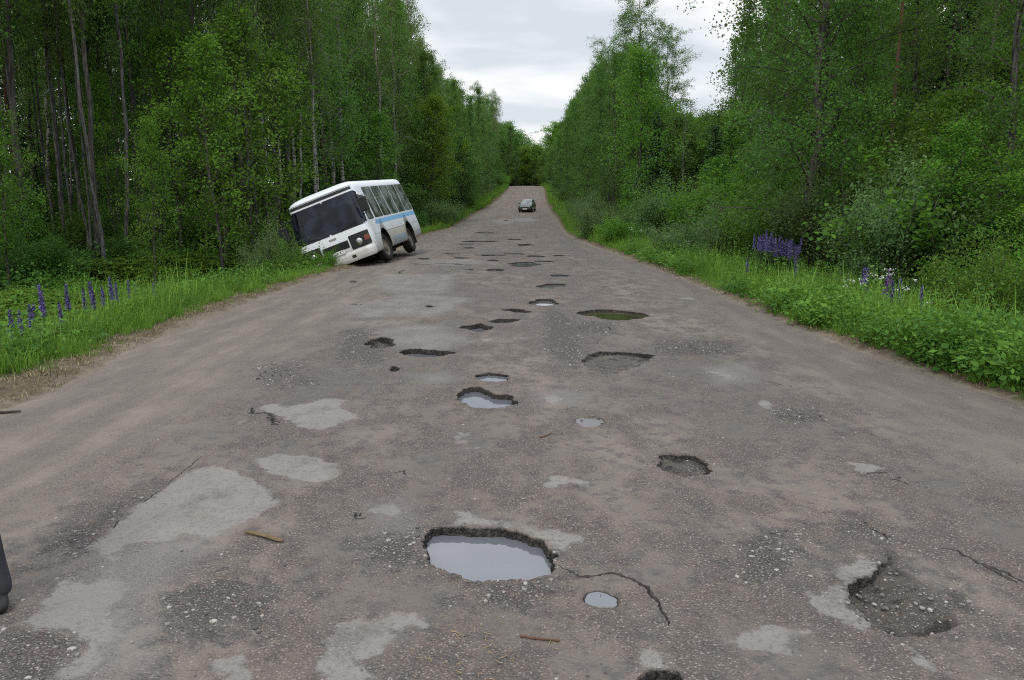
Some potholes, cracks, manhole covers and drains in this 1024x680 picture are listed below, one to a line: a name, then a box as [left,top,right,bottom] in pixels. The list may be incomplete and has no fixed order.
crack [940,548,1024,584]
pothole [364,337,396,349]
crack [559,565,670,626]
pothole [576,309,650,320]
pothole [656,453,713,478]
pothole [847,546,971,637]
pothole [399,348,458,358]
pothole [456,386,519,409]
pothole [581,351,656,374]
pothole [420,526,559,582]
